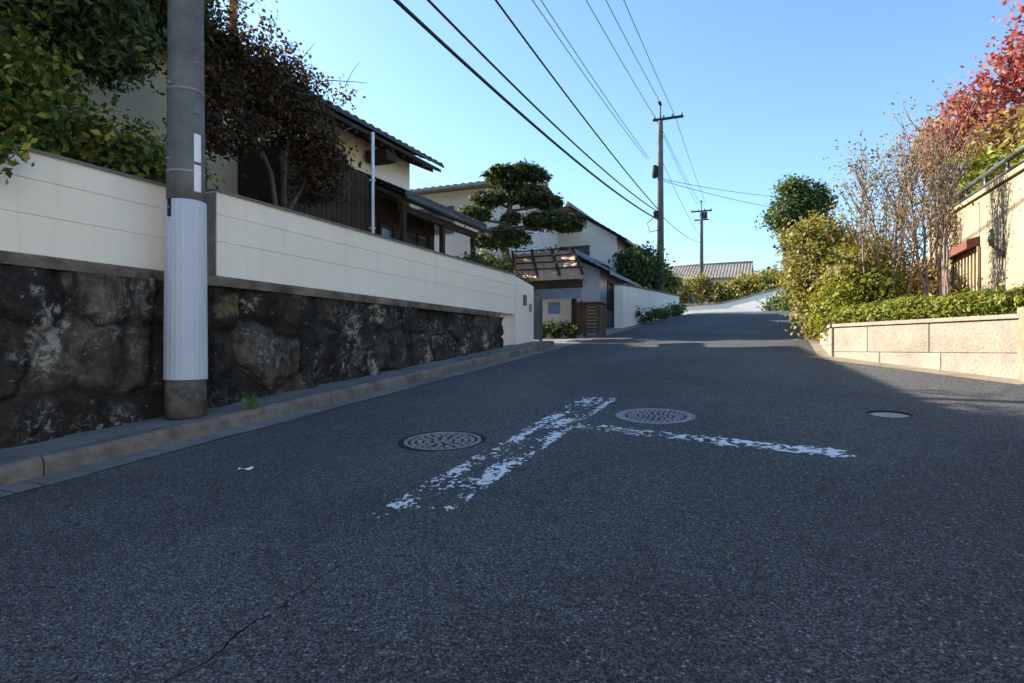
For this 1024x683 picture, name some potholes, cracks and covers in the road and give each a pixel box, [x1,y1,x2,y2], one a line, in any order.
manhole cover [866,410,914,418]
manhole cover [616,408,696,424]
manhole cover [398,431,486,451]
crack [164,562,343,683]
